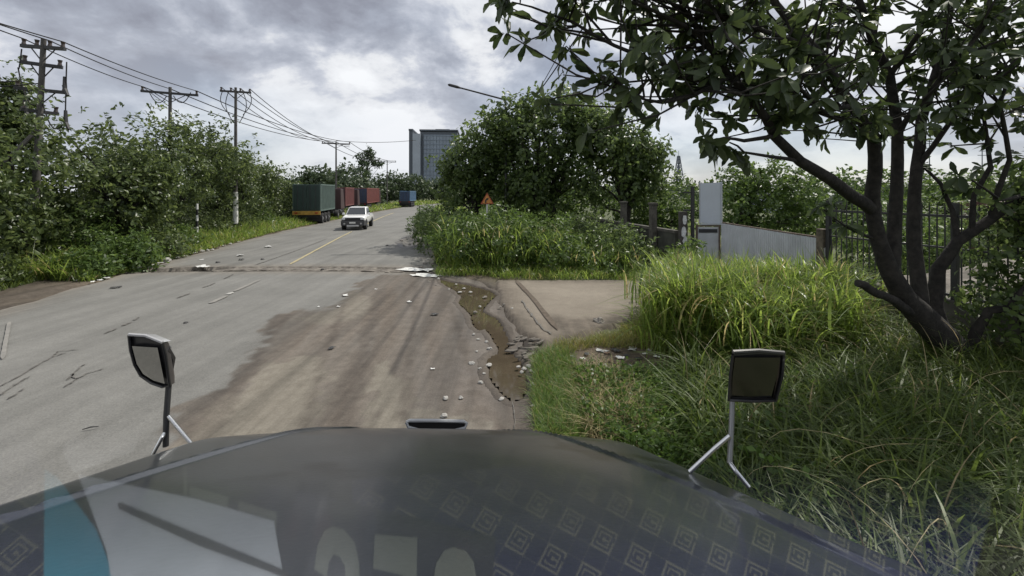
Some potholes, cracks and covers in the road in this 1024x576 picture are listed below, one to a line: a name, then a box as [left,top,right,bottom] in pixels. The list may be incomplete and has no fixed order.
crack [0,349,103,399]
pothole [434,277,539,407]
